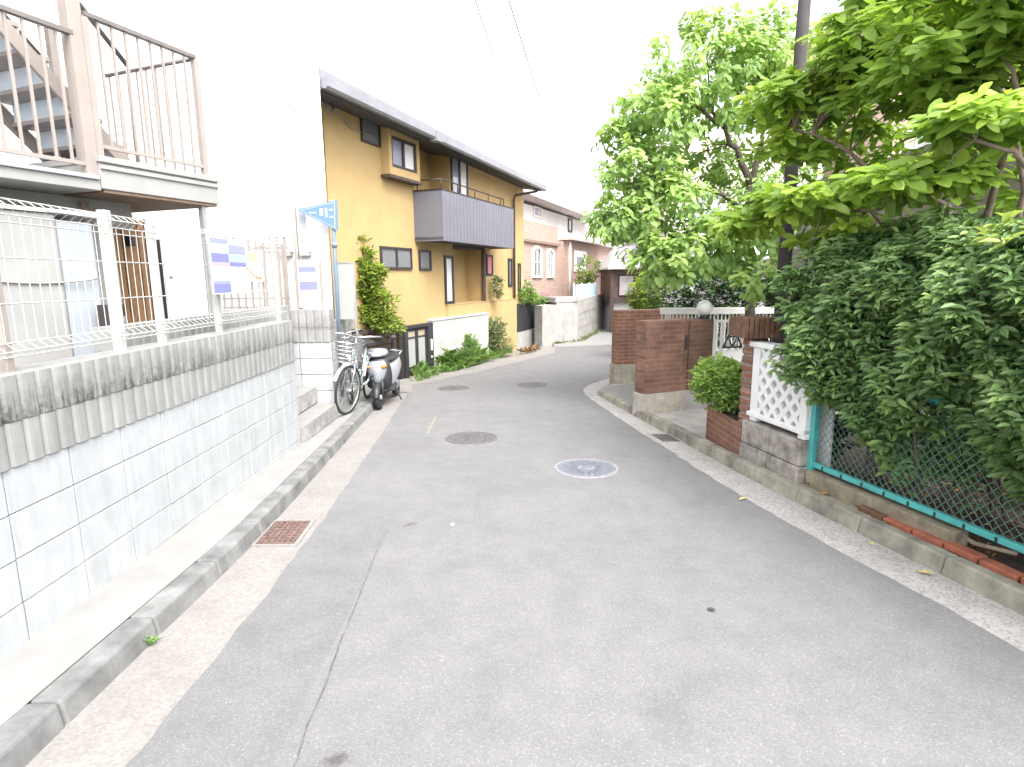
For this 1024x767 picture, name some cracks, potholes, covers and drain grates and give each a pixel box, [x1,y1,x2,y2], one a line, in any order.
drain grate [250,519,316,547]
drain grate [647,433,684,443]
manhole cover [554,458,619,478]
manhole cover [445,431,498,445]
crack [293,535,384,767]
